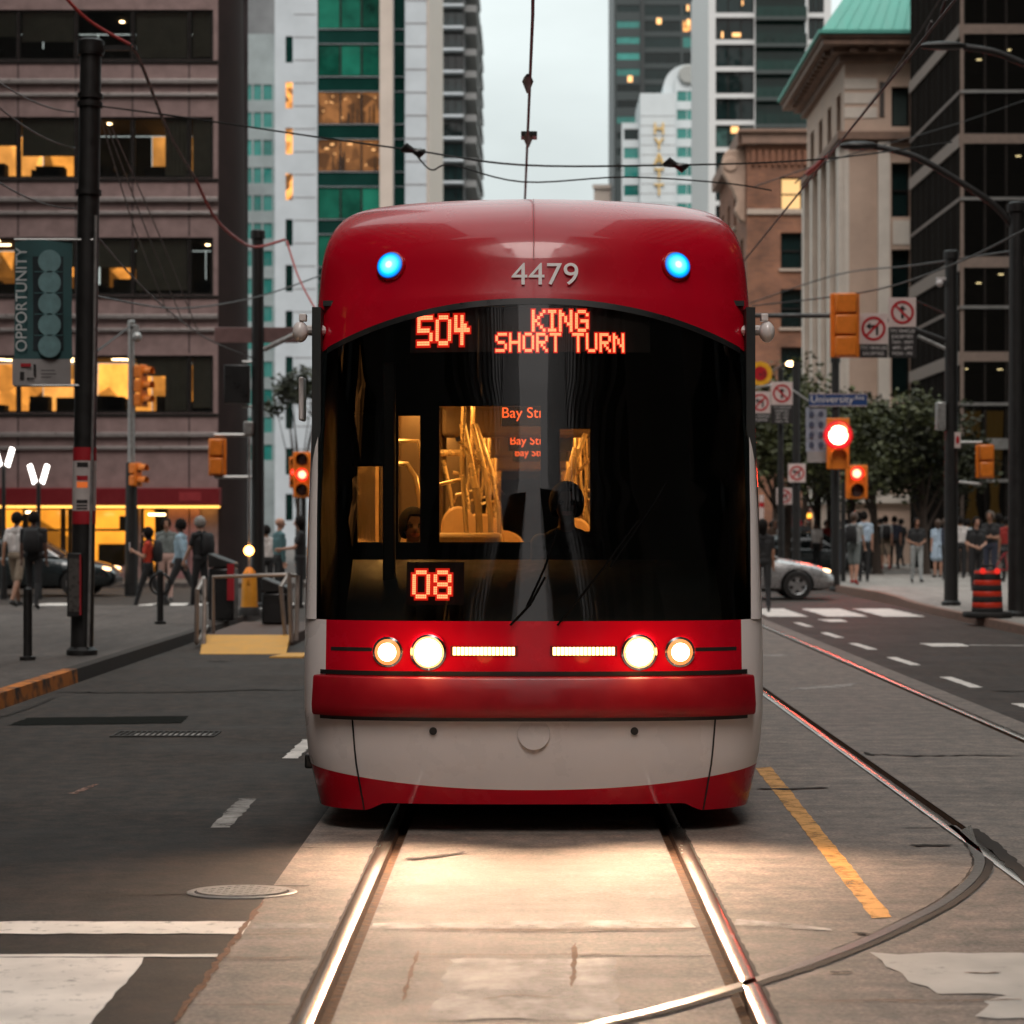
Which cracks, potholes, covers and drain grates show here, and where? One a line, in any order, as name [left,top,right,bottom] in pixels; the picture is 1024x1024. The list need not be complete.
crack [402,950,419,1001]
crack [569,943,578,986]
manhole cover [187,885,310,898]
crack [405,851,464,859]
